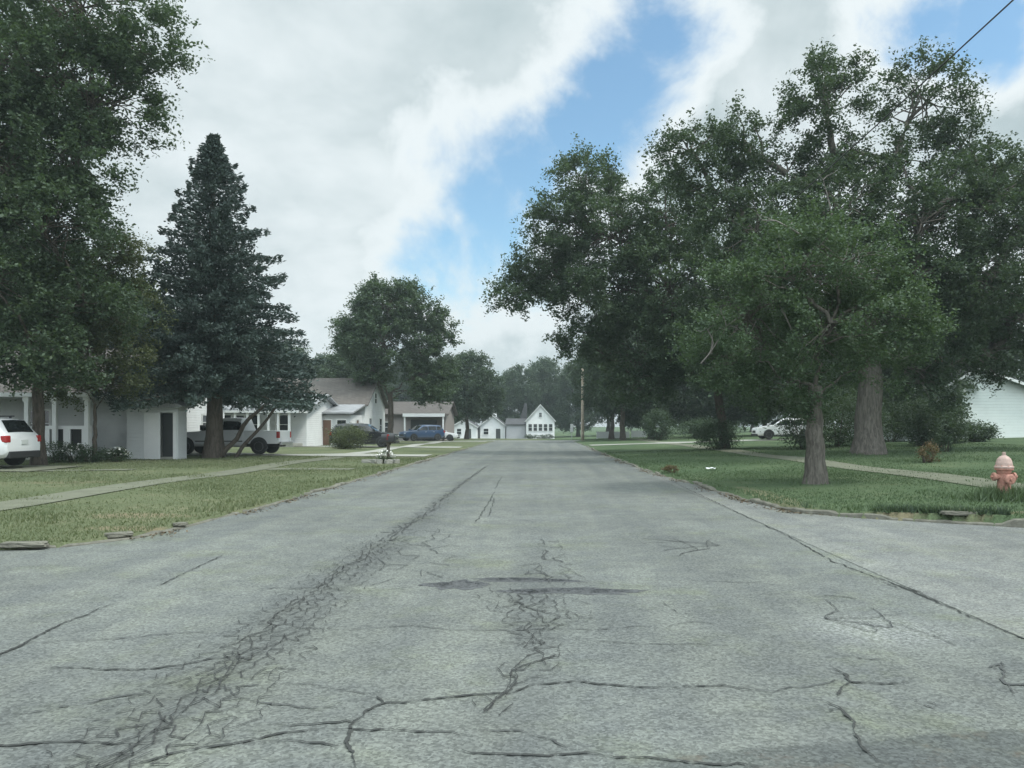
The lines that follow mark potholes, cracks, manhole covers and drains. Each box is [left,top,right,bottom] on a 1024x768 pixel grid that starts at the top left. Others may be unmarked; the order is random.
crack [989,662,1024,691]
crack [0,467,938,768]
